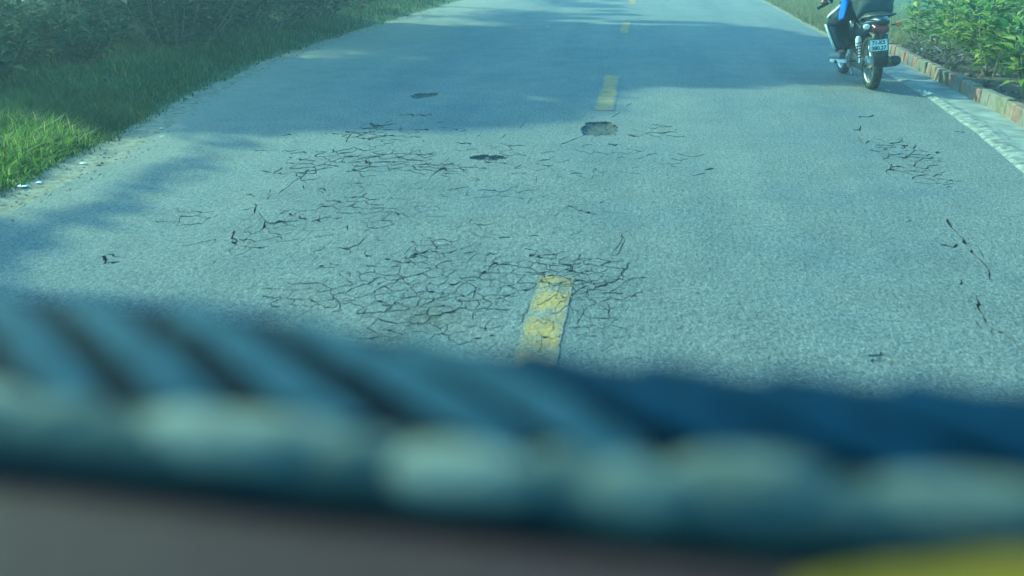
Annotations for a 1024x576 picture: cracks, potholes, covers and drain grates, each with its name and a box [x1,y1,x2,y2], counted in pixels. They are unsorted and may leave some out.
crack [856,115,954,188]
crack [156,186,699,351]
pothole [580,121,618,137]
crack [256,114,640,216]
crack [936,219,1024,364]
crack [571,103,714,176]
